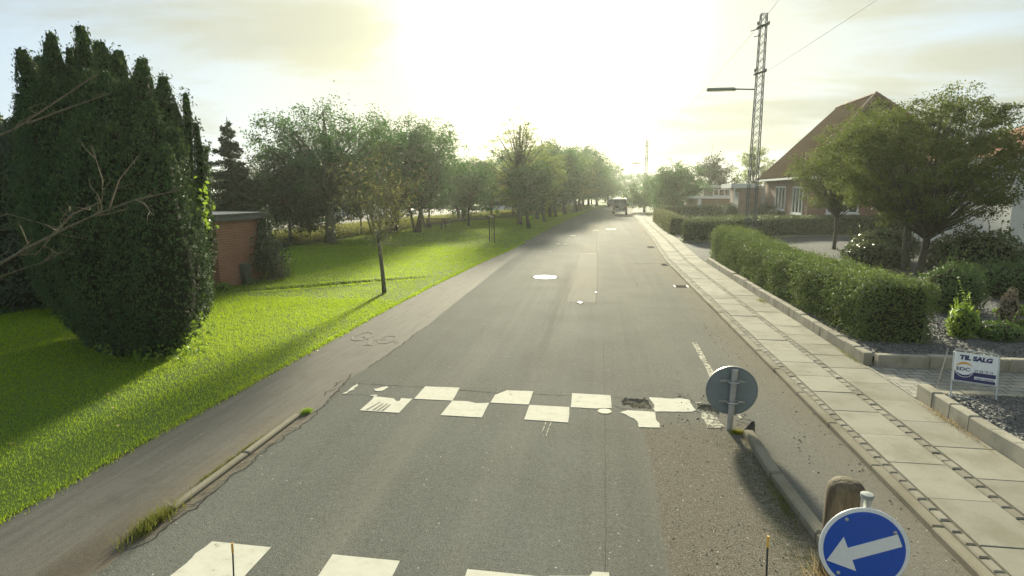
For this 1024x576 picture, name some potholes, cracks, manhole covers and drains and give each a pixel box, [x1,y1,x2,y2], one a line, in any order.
pothole [621,397,652,409]
